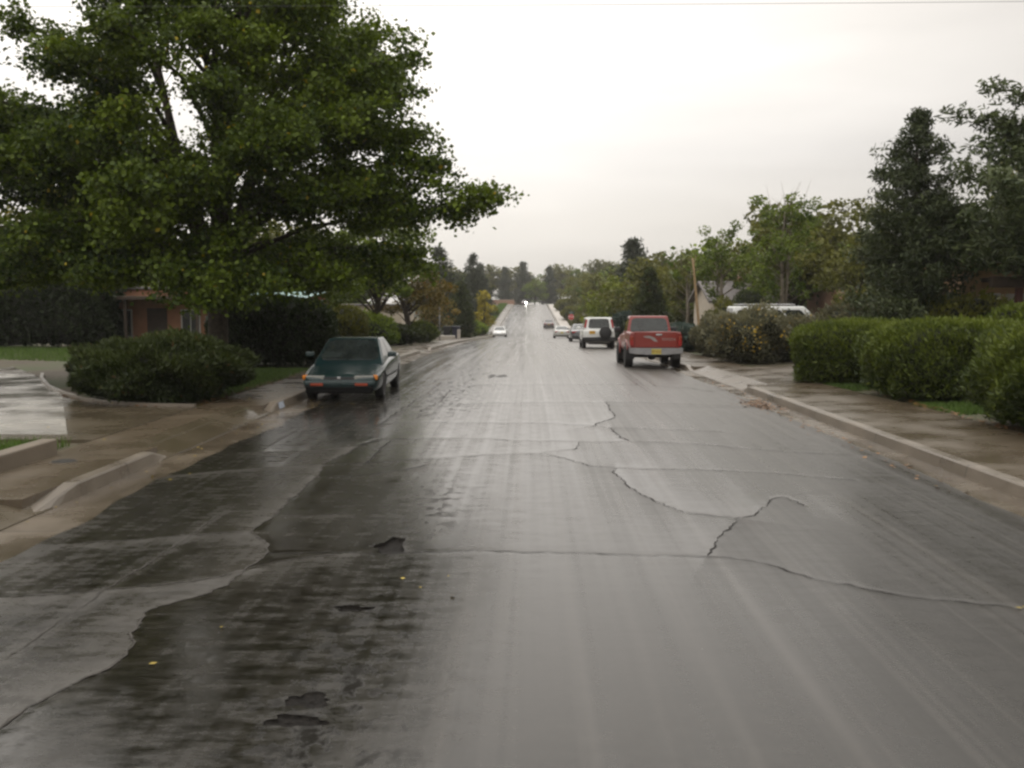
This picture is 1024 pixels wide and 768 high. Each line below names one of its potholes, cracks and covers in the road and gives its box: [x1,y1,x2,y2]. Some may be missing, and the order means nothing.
crack [0,359,854,728]
pothole [274,688,340,712]
pothole [367,535,409,556]
pothole [251,710,340,732]
crack [299,469,1013,607]
pothole [326,603,383,614]
